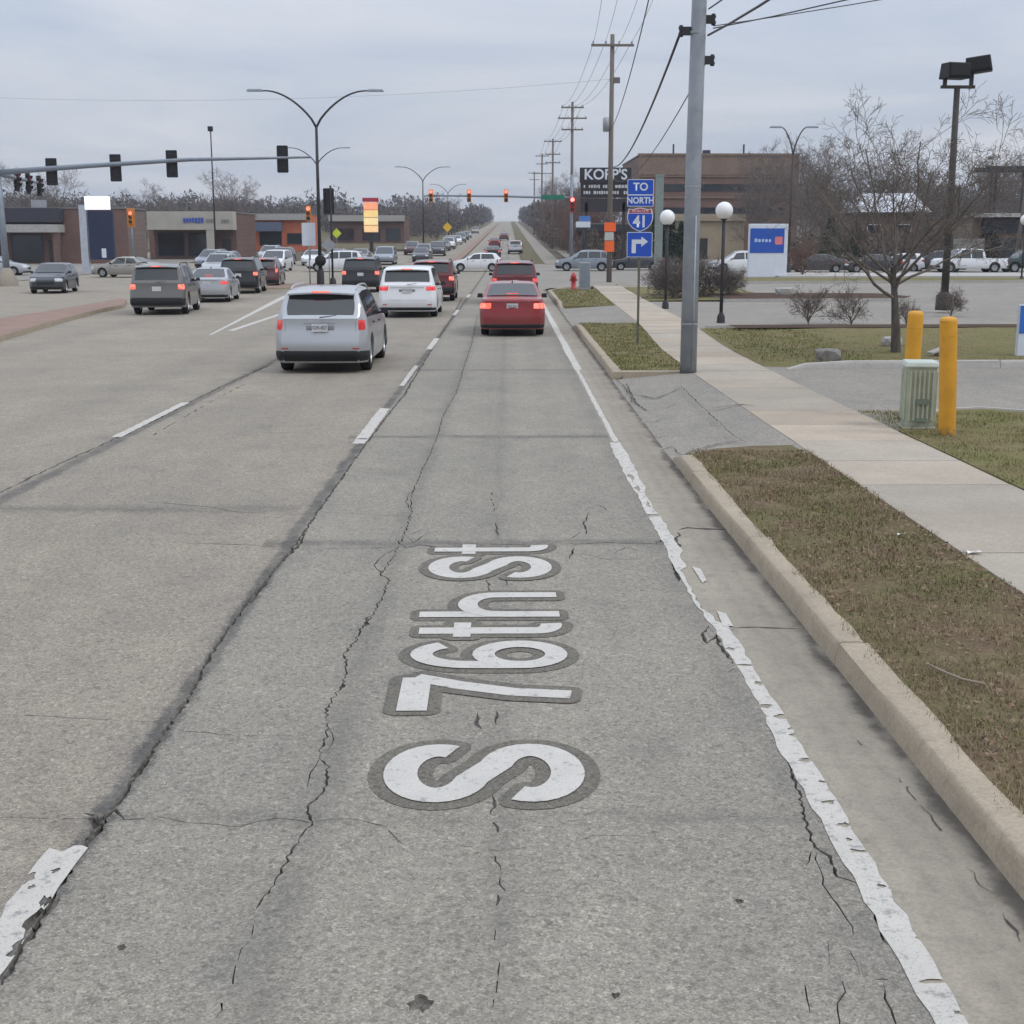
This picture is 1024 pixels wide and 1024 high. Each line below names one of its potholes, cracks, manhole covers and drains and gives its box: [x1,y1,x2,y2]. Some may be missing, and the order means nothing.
pothole [406,994,434,1013]
crack [3,315,662,1017]
crack [700,627,734,672]
crack [703,740,1020,1024]
crack [618,380,682,455]
